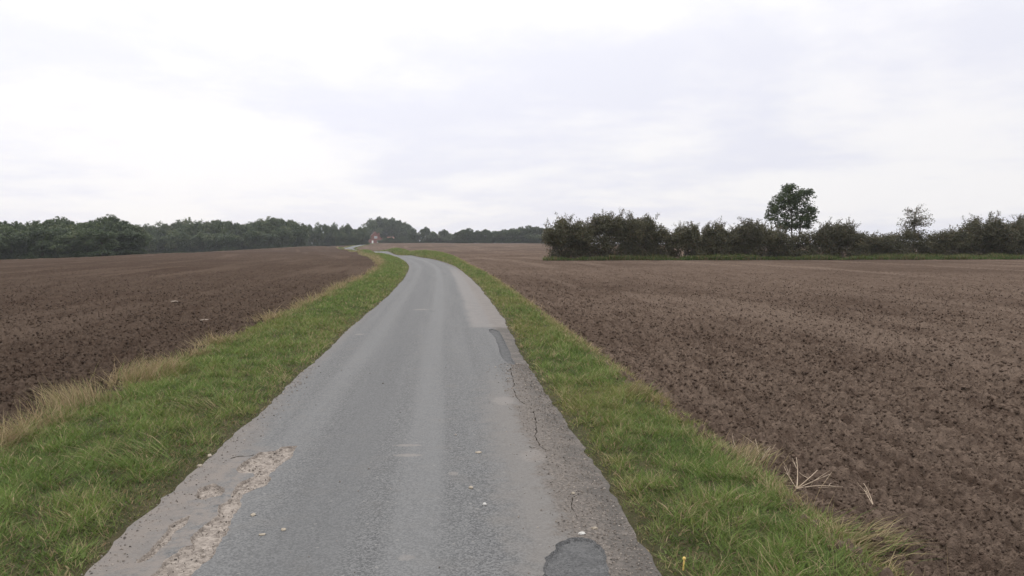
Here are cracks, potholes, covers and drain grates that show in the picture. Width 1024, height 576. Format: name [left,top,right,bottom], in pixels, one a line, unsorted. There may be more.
pothole [151,446,297,576]
crack [510,367,549,451]
